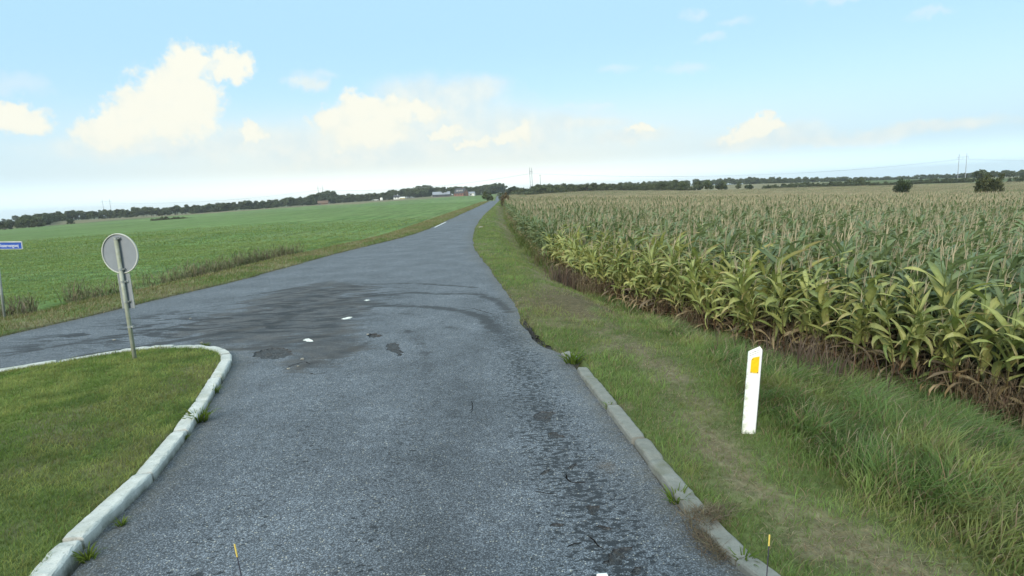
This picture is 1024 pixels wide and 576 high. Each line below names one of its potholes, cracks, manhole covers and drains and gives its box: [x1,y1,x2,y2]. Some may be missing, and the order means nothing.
pothole [252,347,293,359]
pothole [385,343,404,356]
